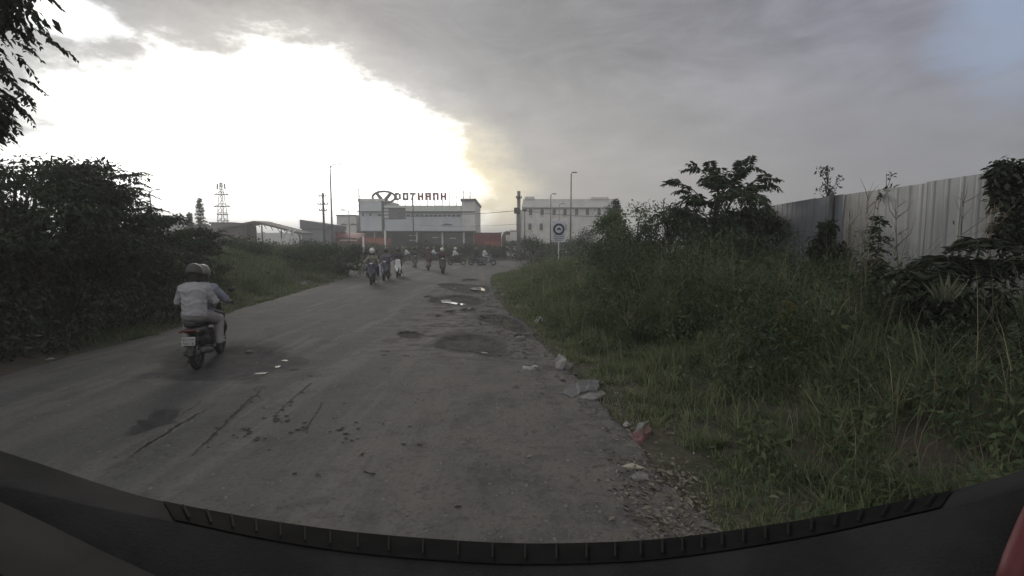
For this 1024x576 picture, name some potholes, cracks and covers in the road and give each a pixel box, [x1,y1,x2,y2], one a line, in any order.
pothole [430,282,497,296]
pothole [420,294,492,307]
pothole [471,313,534,336]
pothole [396,330,424,340]
pothole [420,331,516,360]
